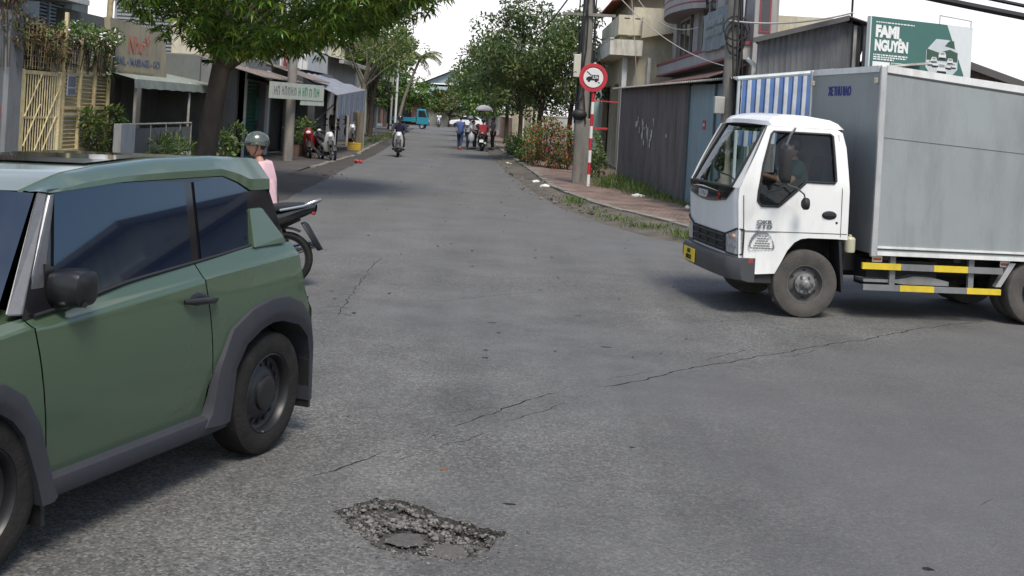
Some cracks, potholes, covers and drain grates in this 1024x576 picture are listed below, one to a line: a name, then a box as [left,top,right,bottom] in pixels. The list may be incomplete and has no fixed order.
crack [602,322,978,387]
crack [311,392,566,477]
crack [317,258,382,316]
pothole [308,491,530,567]
